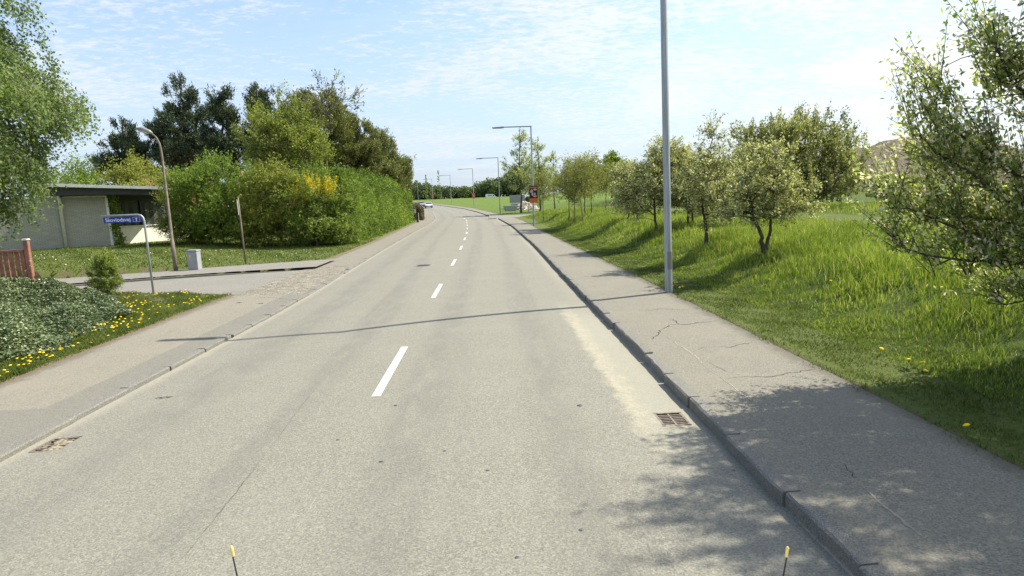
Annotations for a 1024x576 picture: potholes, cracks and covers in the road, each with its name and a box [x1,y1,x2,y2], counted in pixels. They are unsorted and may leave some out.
drain grate [28,436,82,453]
crack [803,442,923,537]
crack [180,388,316,561]
crack [651,309,813,401]
drain grate [653,412,692,425]
